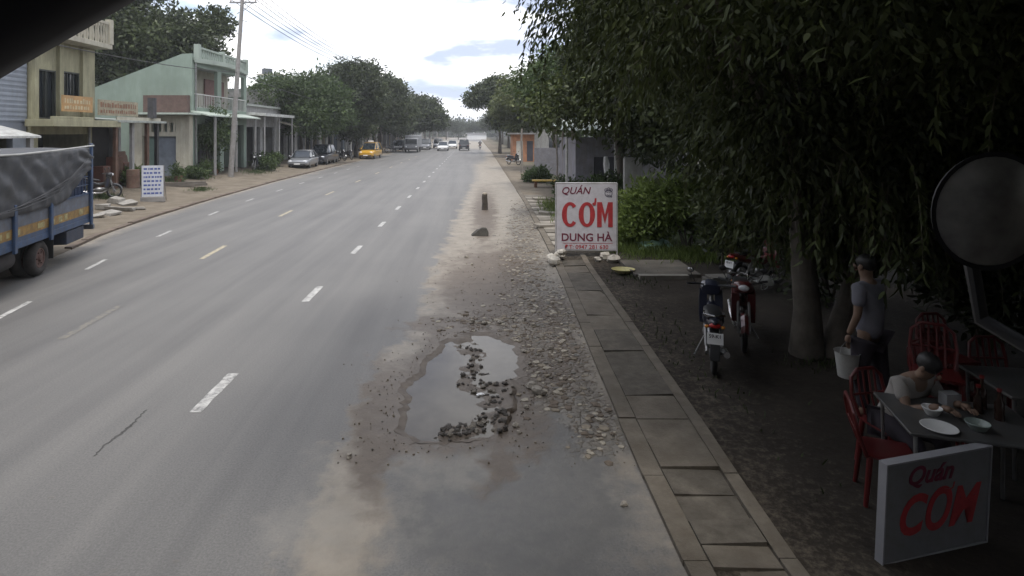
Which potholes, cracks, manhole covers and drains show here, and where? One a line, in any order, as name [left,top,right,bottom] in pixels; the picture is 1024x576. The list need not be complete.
pothole [394,332,527,446]
crack [94,410,146,456]
